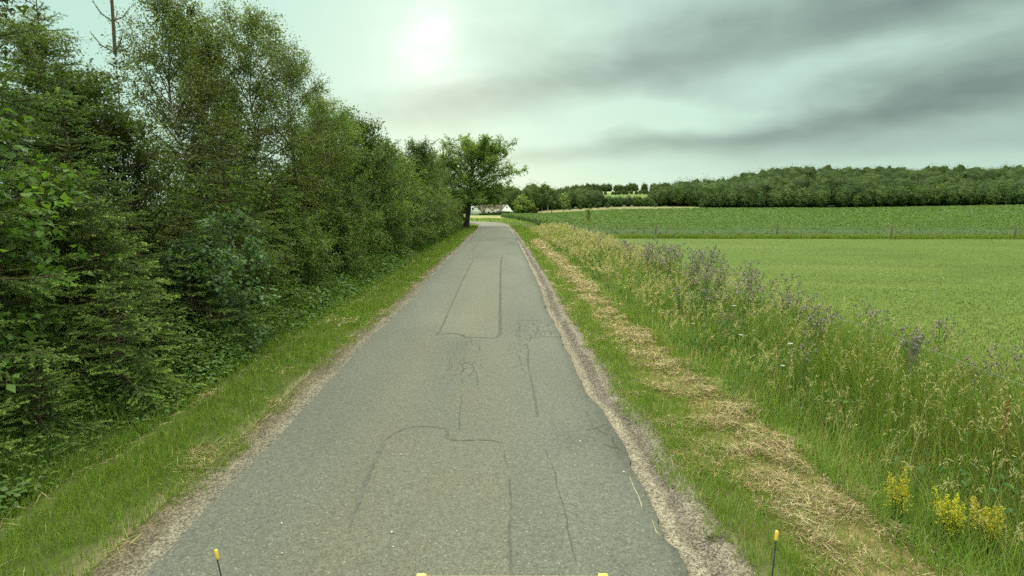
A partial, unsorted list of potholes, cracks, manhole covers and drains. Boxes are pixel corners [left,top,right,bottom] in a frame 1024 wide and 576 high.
crack [442,341,481,430]
